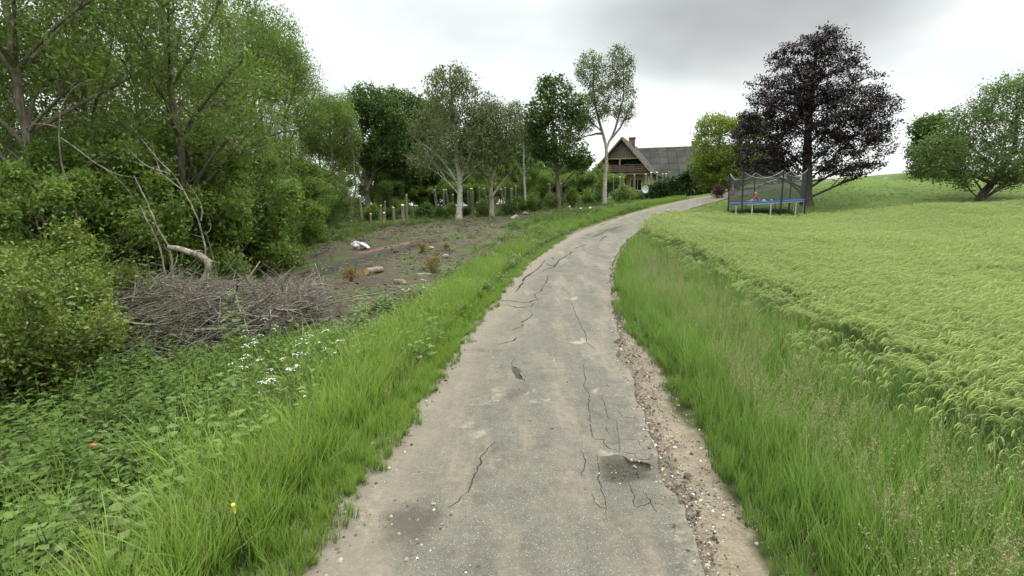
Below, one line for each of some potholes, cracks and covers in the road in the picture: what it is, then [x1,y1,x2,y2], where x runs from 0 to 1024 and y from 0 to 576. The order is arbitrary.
crack [448,442,495,508]
crack [501,223,625,364]
crack [629,484,667,512]
crack [571,303,649,513]
pothole [598,454,653,484]
